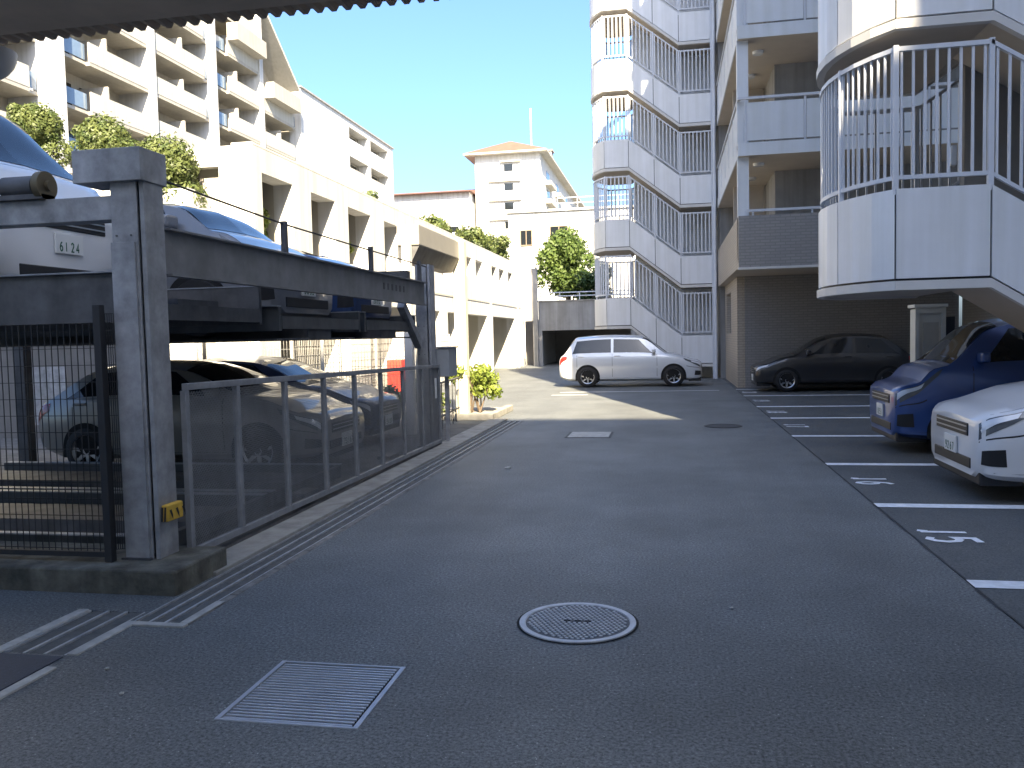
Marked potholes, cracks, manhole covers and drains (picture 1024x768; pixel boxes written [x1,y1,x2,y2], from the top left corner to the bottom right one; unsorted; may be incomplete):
drain grate [214,660,406,730]
manhole cover [517,602,639,644]
